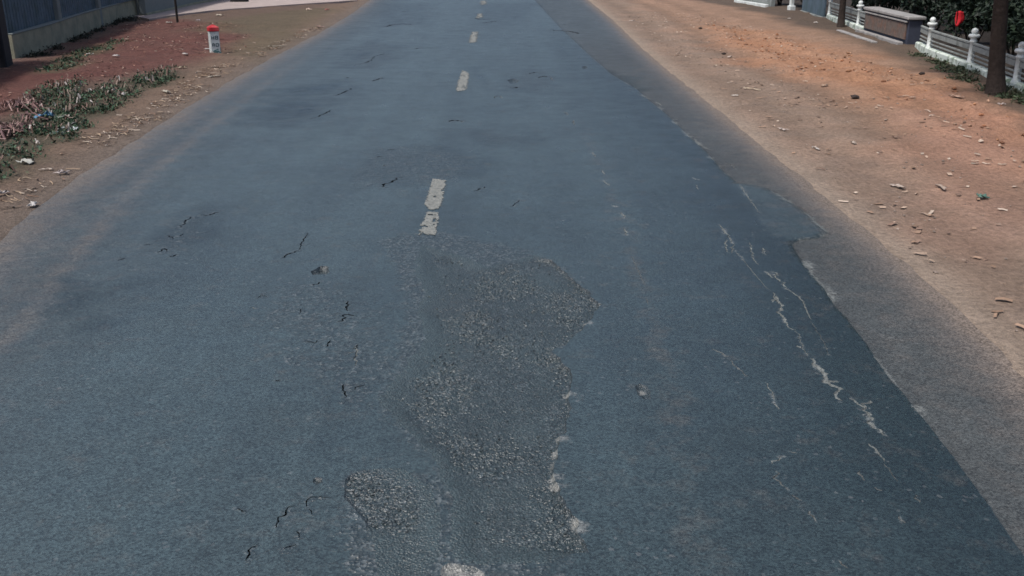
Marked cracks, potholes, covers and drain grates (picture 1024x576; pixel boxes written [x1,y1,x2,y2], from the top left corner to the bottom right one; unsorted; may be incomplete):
crack [718,224,921,523]
crack [246,496,328,561]
crack [307,340,358,365]
